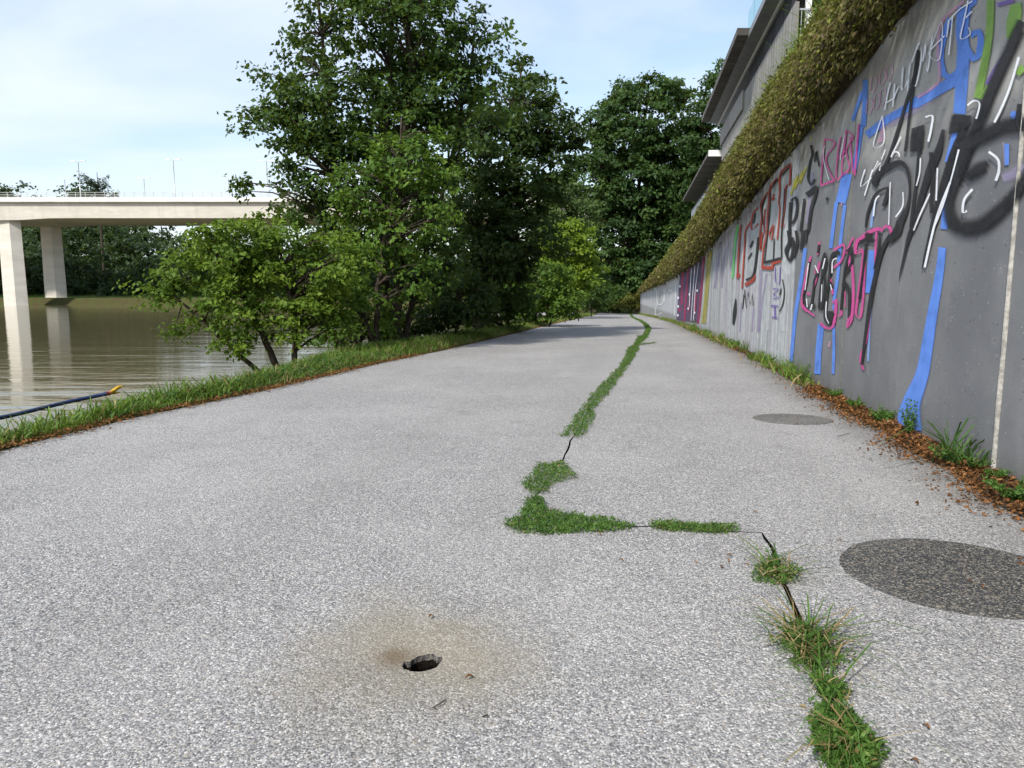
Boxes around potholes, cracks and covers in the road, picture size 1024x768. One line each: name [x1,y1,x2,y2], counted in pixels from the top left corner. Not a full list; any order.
crack [525,404,860,761]
pothole [402,654,442,672]
